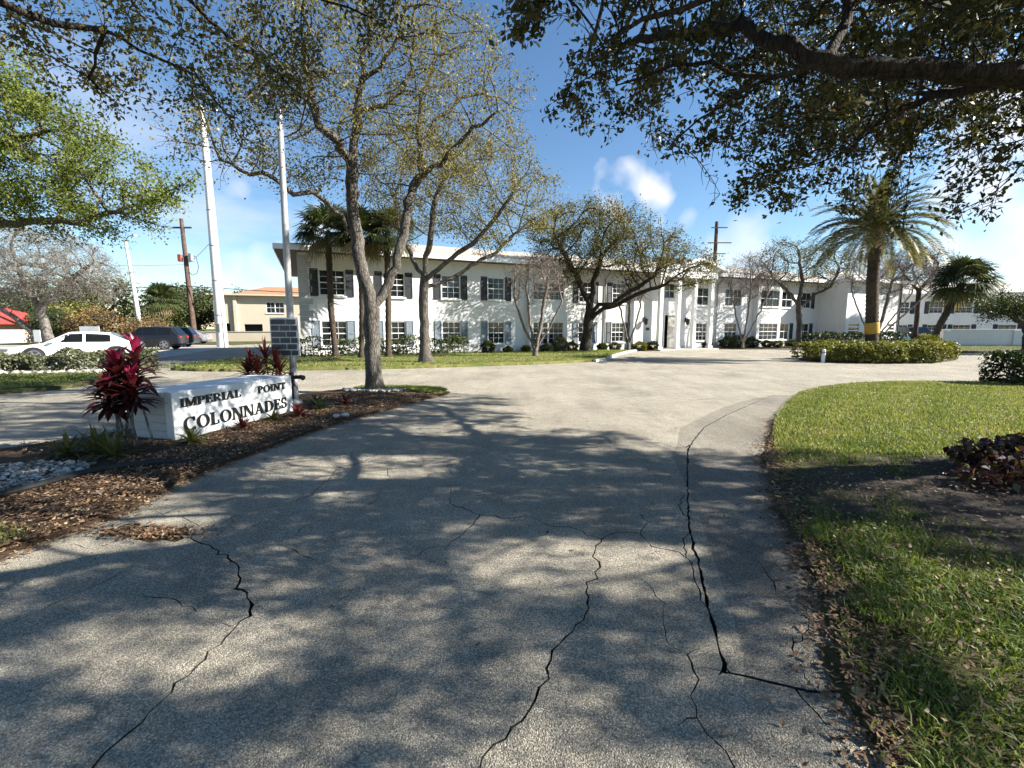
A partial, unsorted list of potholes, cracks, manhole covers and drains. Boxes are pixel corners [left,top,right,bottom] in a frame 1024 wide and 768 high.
crack [91,506,254,768]
crack [758,561,822,683]
crack [641,579,735,768]
crack [413,483,692,768]
